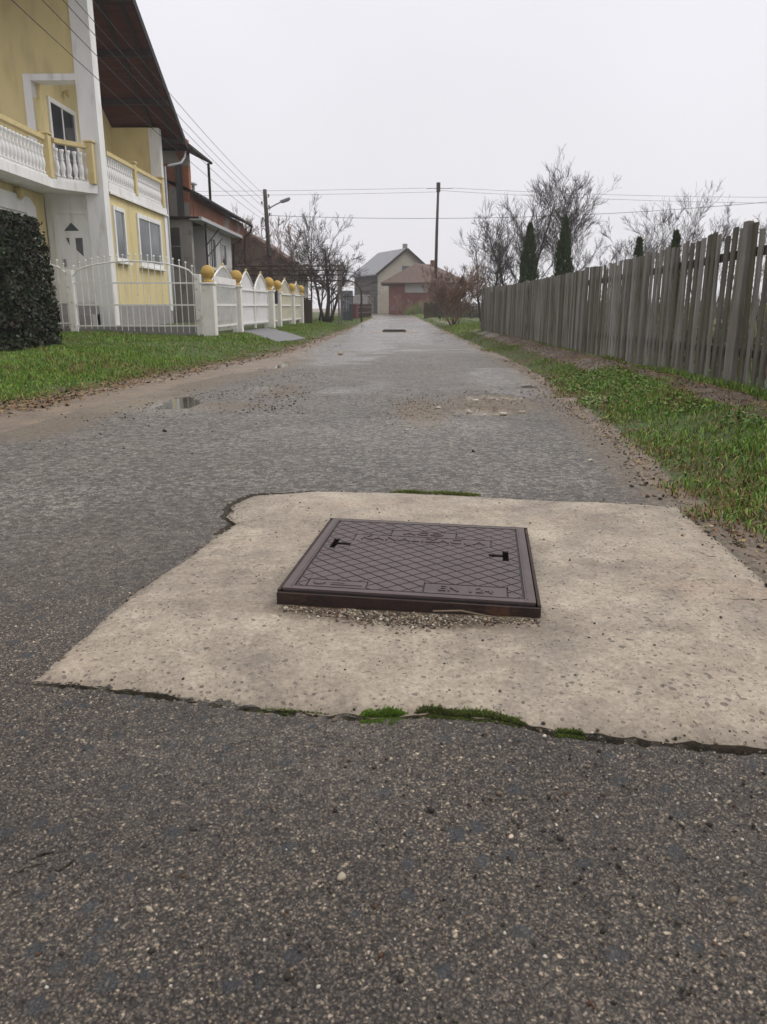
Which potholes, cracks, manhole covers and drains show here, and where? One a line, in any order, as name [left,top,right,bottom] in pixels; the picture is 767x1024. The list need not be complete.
manhole cover [277,518,541,618]
pothole [148,393,208,410]
crack [13,851,75,877]
